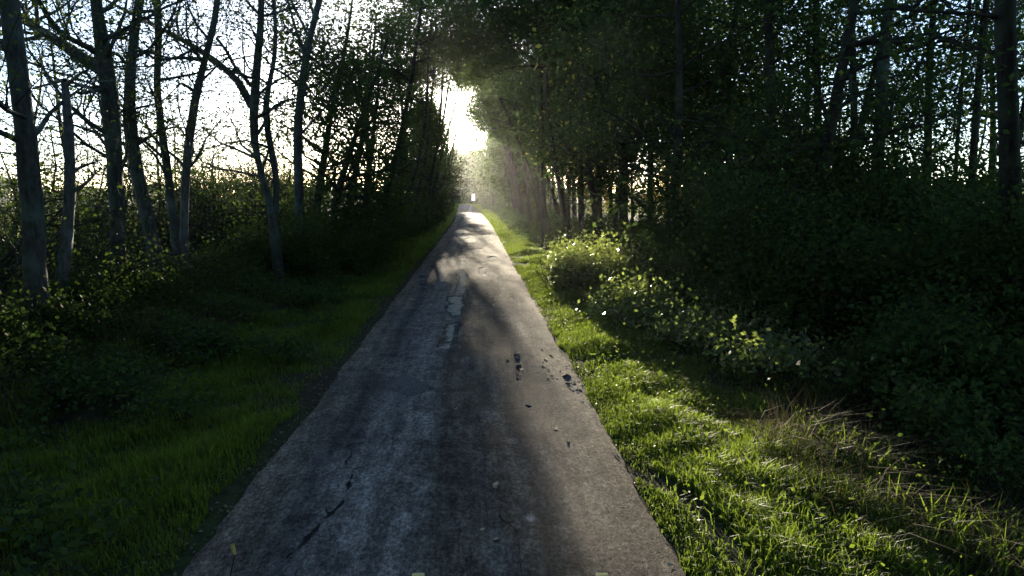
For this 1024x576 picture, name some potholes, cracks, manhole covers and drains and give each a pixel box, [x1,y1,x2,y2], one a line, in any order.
pothole [514,354,523,383]
crack [491,490,522,575]
pothole [562,374,580,393]
crack [286,435,389,559]
